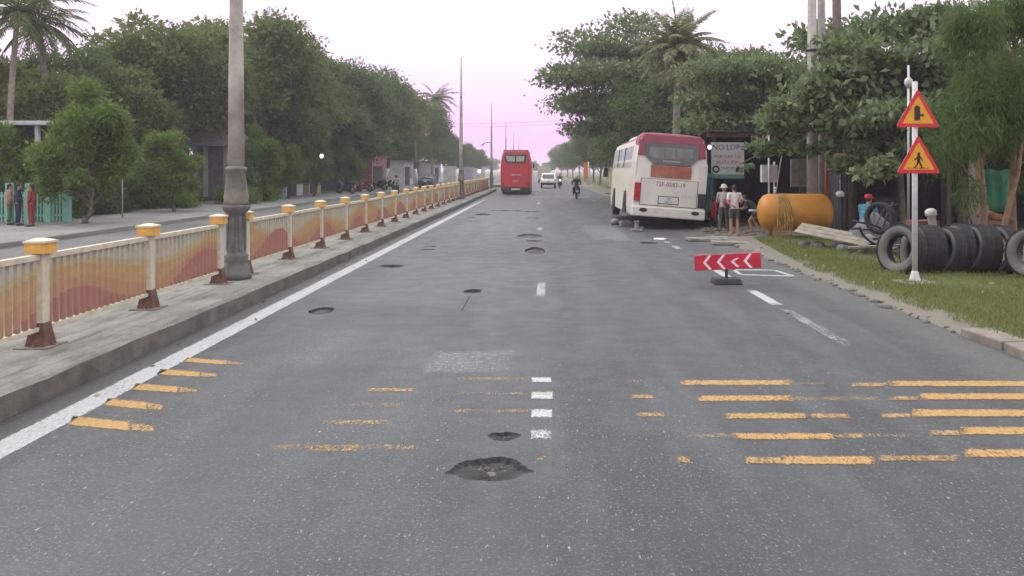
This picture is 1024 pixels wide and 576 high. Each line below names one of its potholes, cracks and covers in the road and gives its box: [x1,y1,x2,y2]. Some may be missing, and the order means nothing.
pothole [487,432,521,443]
pothole [444,456,535,485]
